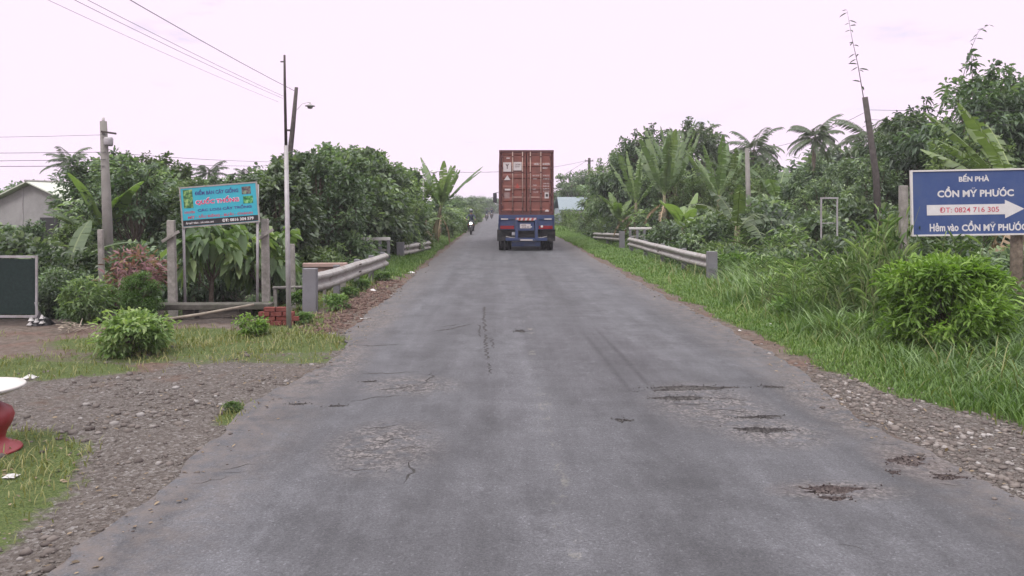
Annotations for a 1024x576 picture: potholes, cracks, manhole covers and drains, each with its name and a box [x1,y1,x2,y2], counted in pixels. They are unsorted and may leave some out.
pothole [633,384,752,392]
pothole [885,453,934,467]
crack [338,422,426,480]
crack [354,371,435,401]
crack [437,307,494,374]
pothole [720,425,800,434]
pothole [817,493,856,502]
pothole [798,483,882,496]
pothole [929,470,982,480]
pothole [643,394,714,402]
